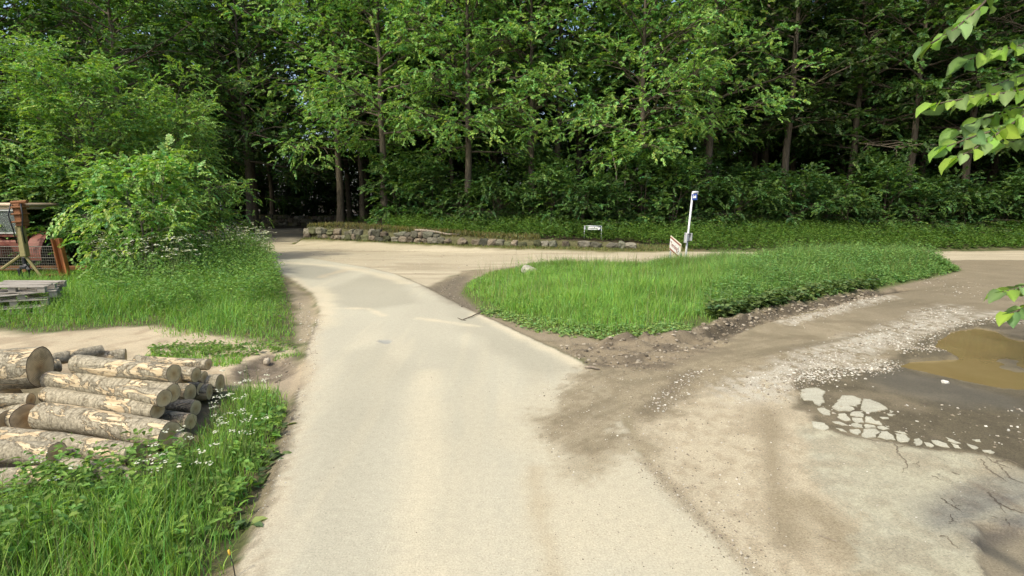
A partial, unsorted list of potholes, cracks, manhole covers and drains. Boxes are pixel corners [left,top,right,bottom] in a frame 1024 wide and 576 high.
crack [800,387,1023,528]
crack [940,498,962,549]
pothole [897,327,1024,390]
